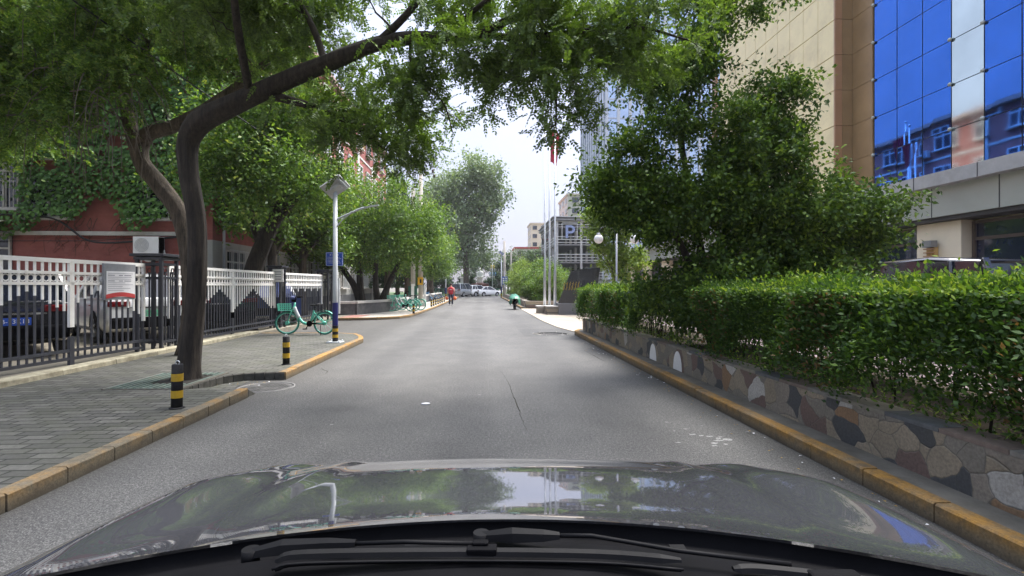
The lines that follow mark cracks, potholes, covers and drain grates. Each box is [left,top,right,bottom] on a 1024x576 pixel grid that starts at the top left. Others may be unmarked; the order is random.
manhole cover [236,382,296,393]
